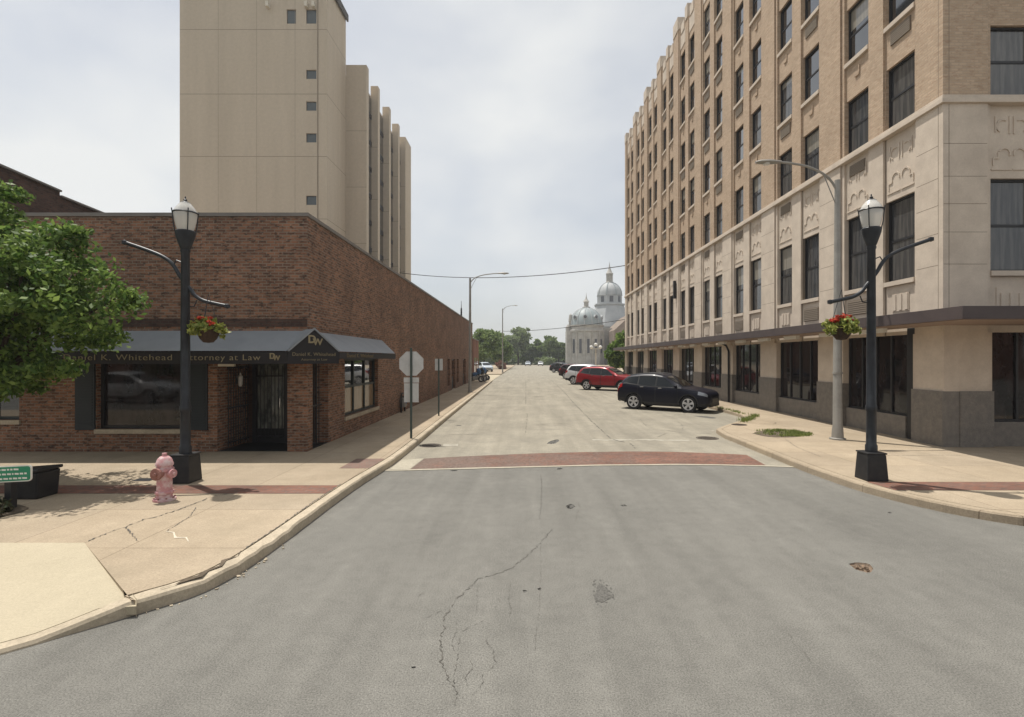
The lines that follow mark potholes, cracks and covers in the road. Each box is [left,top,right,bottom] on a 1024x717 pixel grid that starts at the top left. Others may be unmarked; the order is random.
pothole [850,563,873,572]
crack [424,532,550,698]
